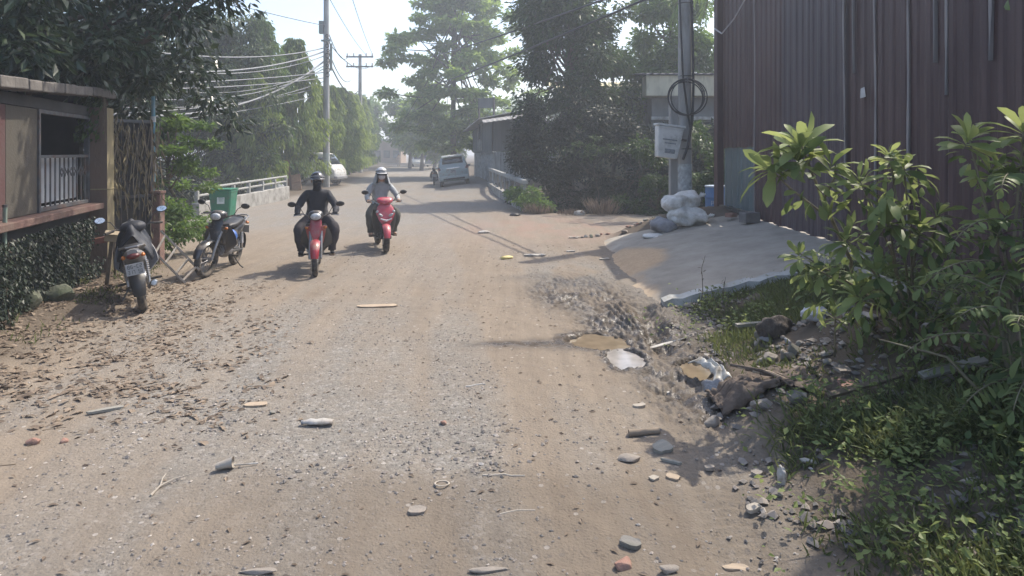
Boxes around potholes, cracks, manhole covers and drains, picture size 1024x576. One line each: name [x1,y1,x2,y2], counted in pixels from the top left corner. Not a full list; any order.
pothole [673,353,732,388]
pothole [600,346,656,375]
pothole [553,330,639,352]
